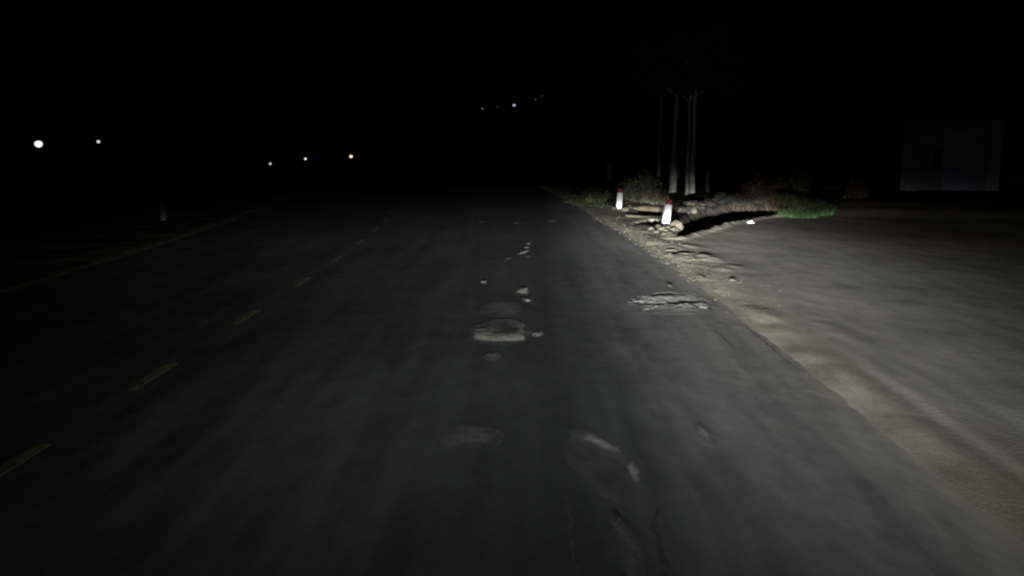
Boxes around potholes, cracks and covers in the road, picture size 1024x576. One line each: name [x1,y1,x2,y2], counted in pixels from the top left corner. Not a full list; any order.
pothole [515,286,531,295]
pothole [685,420,725,450]
pothole [549,424,667,518]
crack [650,499,670,576]
pothole [624,290,718,315]
pothole [464,318,537,345]
